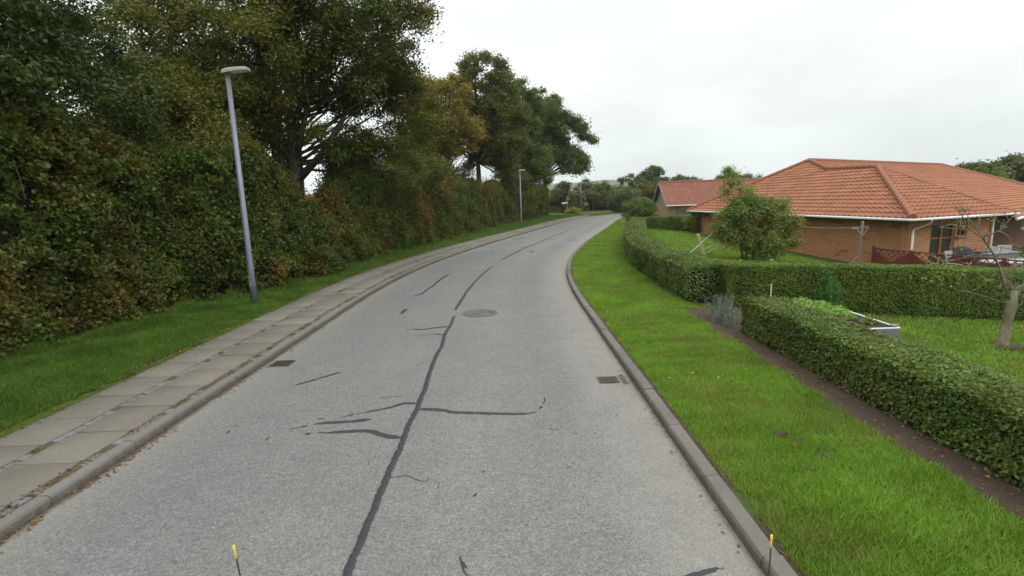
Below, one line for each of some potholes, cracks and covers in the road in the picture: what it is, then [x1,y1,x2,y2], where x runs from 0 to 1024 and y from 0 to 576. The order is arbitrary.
manhole cover [462,309,498,317]
drain grate [597,376,620,384]
